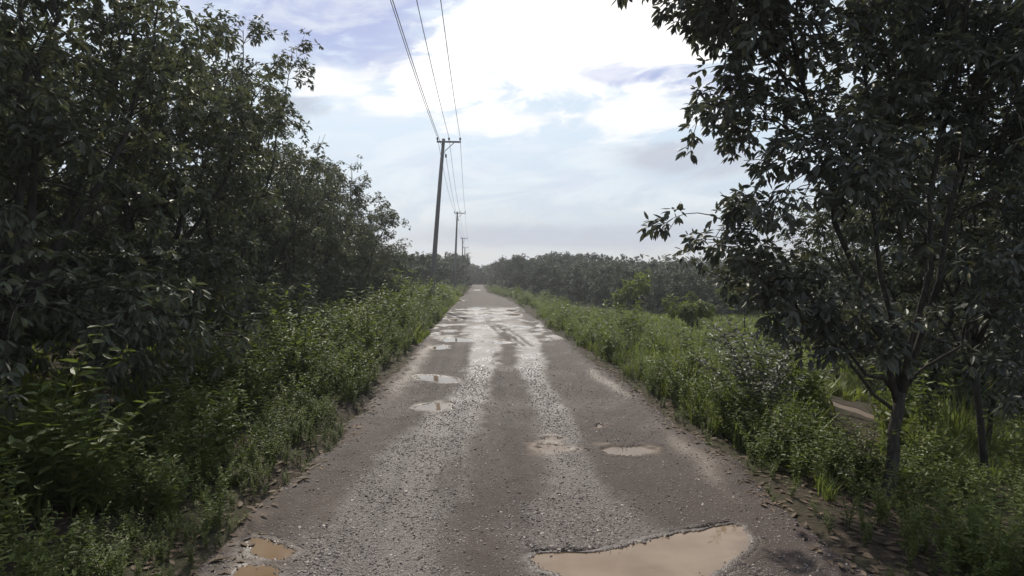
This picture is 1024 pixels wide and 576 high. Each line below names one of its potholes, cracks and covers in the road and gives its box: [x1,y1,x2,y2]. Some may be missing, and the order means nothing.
pothole [411,374,463,384]
pothole [532,434,570,445]
pothole [526,440,581,456]
pothole [589,443,666,458]
pothole [519,521,760,576]
pothole [409,401,460,412]
pothole [220,560,294,576]
pothole [237,533,307,564]
